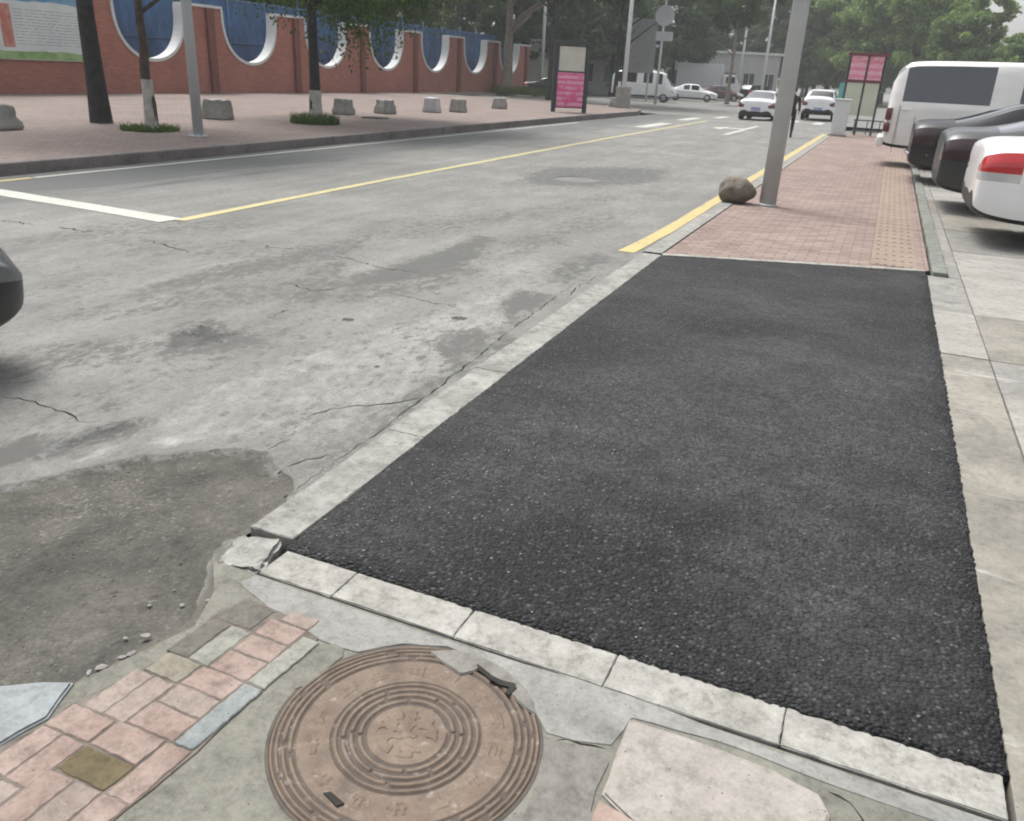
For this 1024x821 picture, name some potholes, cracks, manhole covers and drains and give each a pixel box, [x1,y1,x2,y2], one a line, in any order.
crack [309,397,423,416]
pothole [0,448,294,686]
manhole cover [264,645,543,821]
crack [3,396,96,423]
